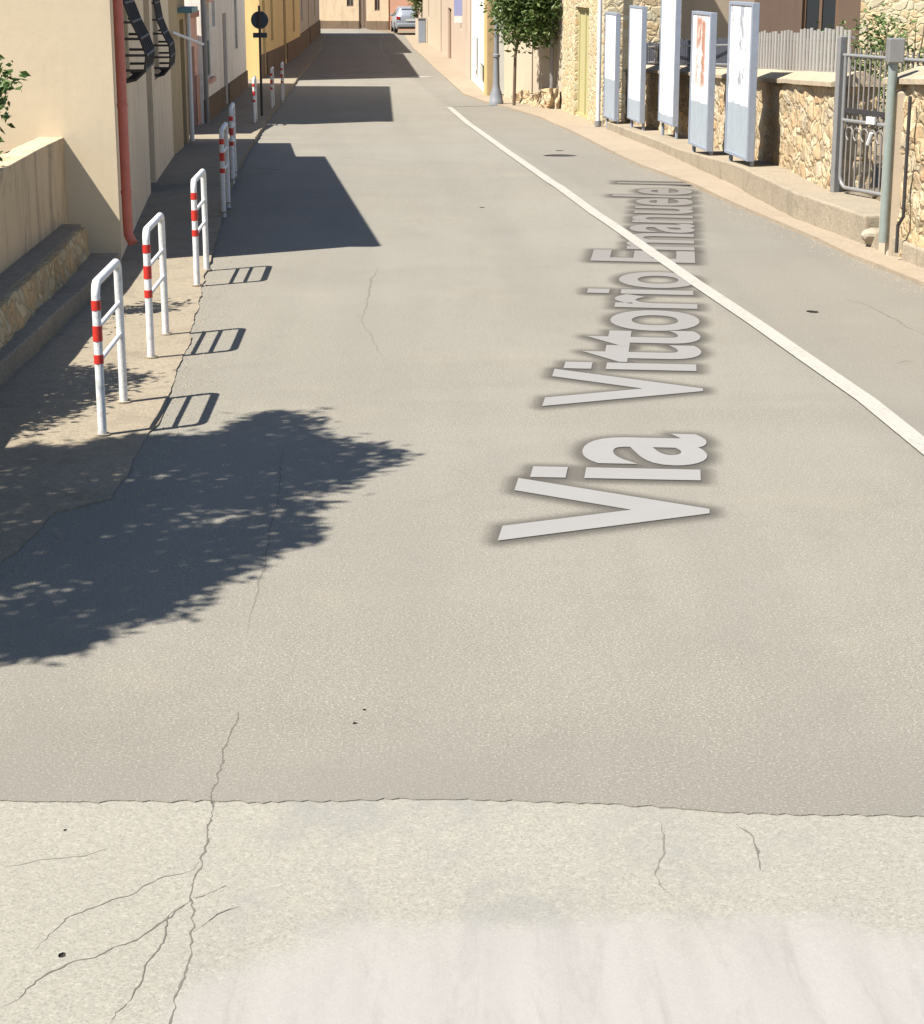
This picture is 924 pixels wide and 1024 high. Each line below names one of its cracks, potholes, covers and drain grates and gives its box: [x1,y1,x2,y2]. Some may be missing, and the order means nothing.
crack [357,268,382,356]
crack [736,824,761,870]
crack [4,713,239,1024]
crack [849,300,923,334]
crack [248,442,286,627]
crack [654,823,675,899]
